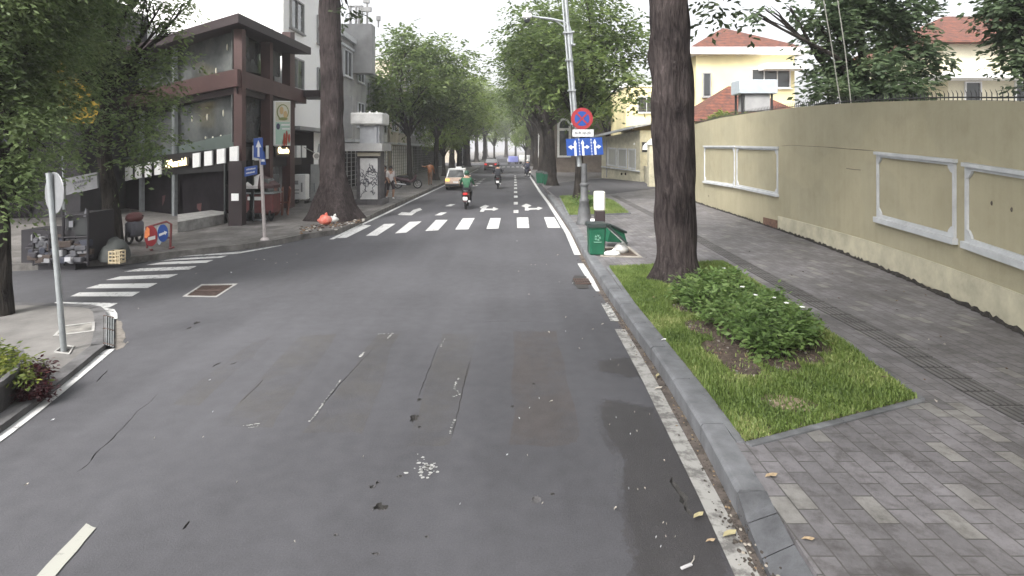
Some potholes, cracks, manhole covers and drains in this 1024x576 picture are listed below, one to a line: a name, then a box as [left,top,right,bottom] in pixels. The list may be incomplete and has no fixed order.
crack [82,399,153,469]
manhole cover [182,283,238,297]
